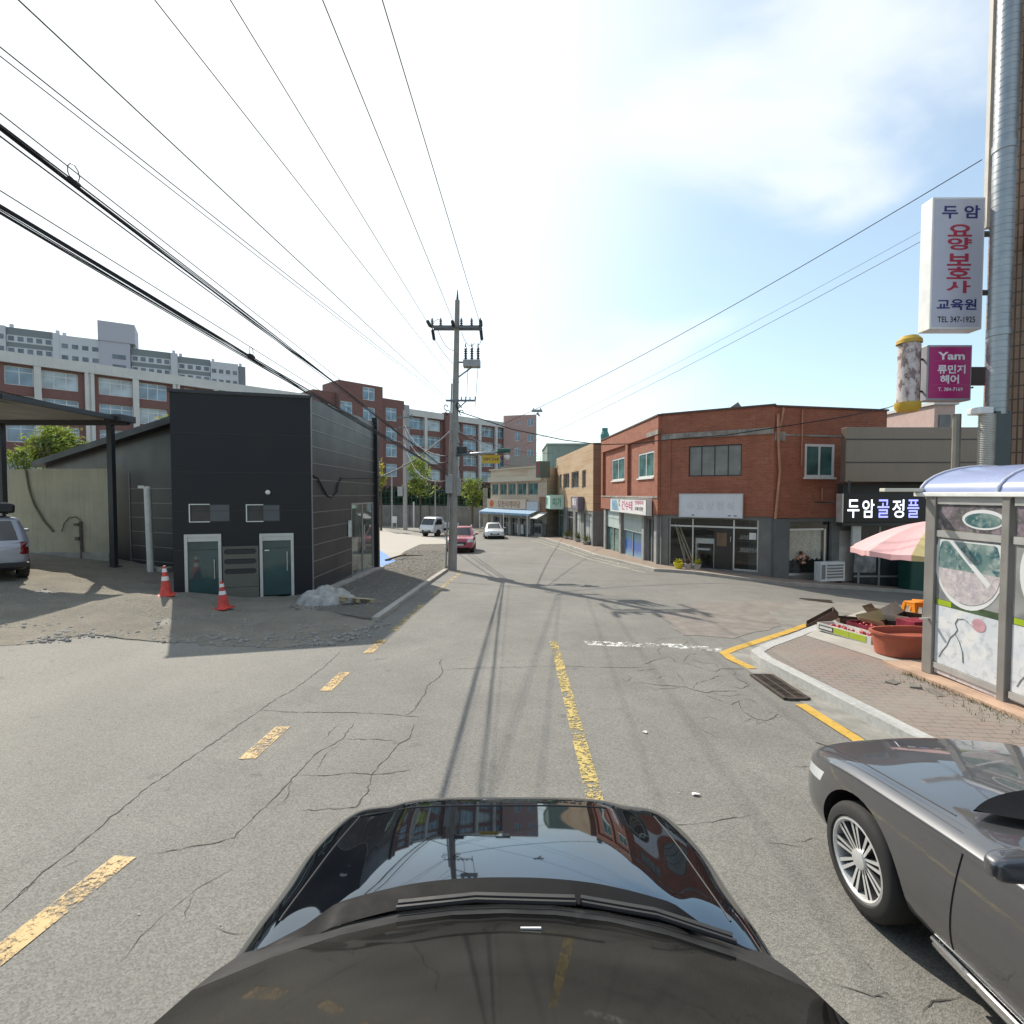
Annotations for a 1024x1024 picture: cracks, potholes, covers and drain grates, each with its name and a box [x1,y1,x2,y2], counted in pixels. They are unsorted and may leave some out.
crack [824,961,967,1011]
crack [109,867,252,970]
crack [6,637,783,907]
drain grate [750,674,811,700]
